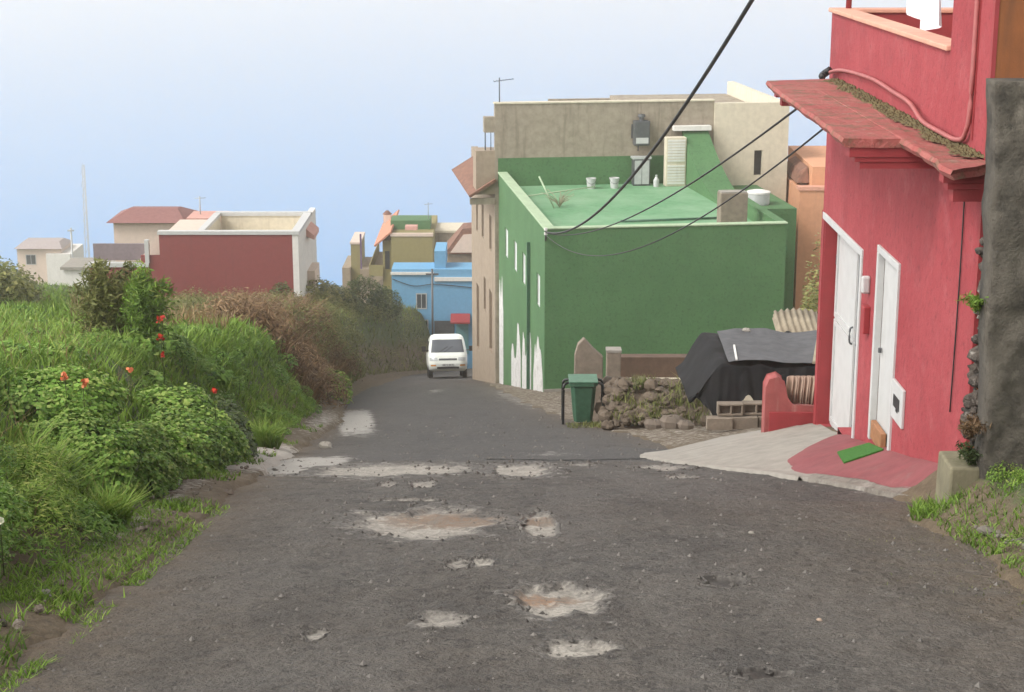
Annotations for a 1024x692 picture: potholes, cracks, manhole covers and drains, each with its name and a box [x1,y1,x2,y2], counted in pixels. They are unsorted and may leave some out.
pothole [461,554,499,568]
pothole [613,463,704,472]
pothole [697,571,754,589]
pothole [530,636,628,661]
pothole [653,472,703,480]
pothole [259,460,513,479]
pothole [405,609,484,630]
pothole [512,507,571,540]
pothole [463,458,572,480]
pothole [443,556,475,571]
pothole [473,578,639,623]
pothole [375,478,400,488]
